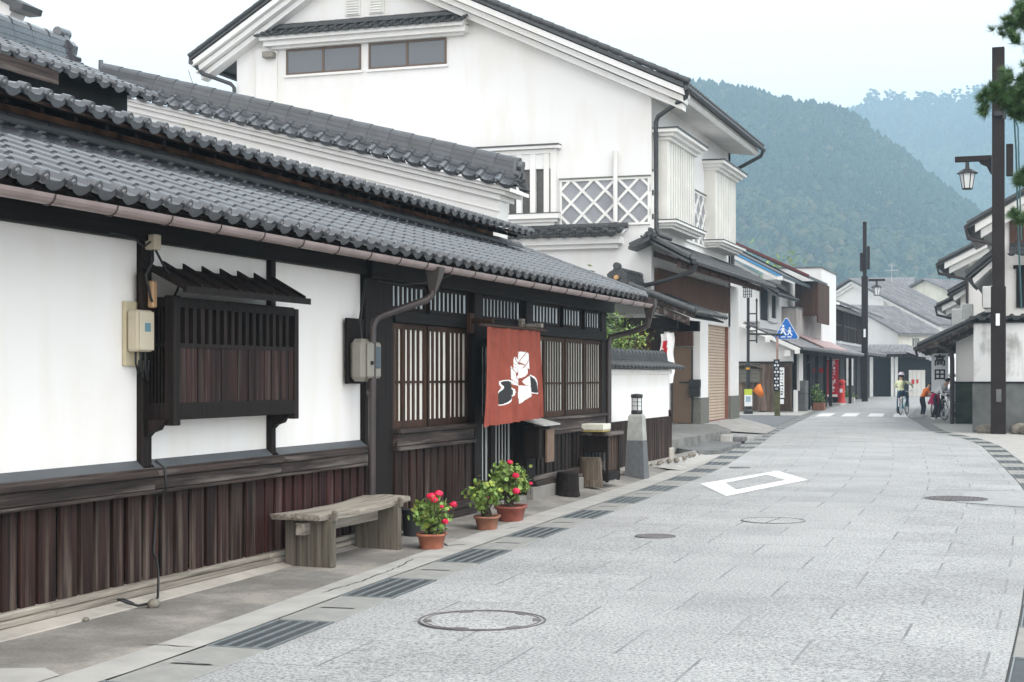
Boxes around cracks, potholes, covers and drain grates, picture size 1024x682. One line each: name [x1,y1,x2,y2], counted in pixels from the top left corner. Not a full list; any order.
drain grate [434,548,512,564]
drain grate [504,527,569,538]
drain grate [559,510,613,519]
drain grate [602,496,650,504]
drain grate [205,619,335,650]
drain grate [340,578,437,599]
manhole cover [418,610,546,631]
